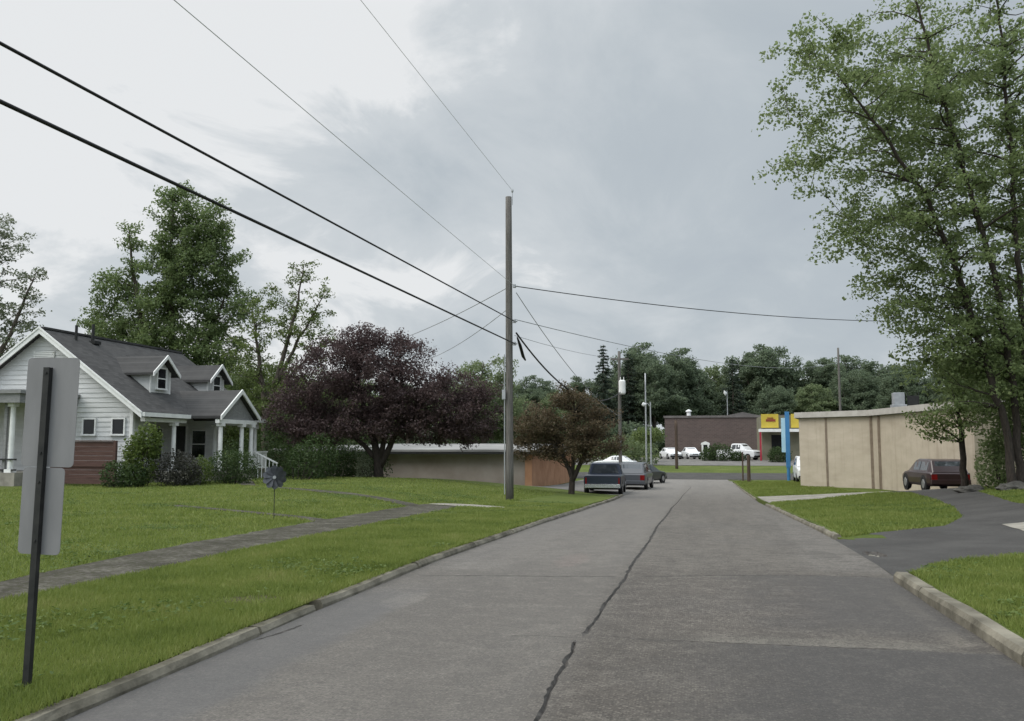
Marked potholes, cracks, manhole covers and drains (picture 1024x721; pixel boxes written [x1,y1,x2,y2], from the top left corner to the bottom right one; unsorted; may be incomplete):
crack [450,488,905,721]
